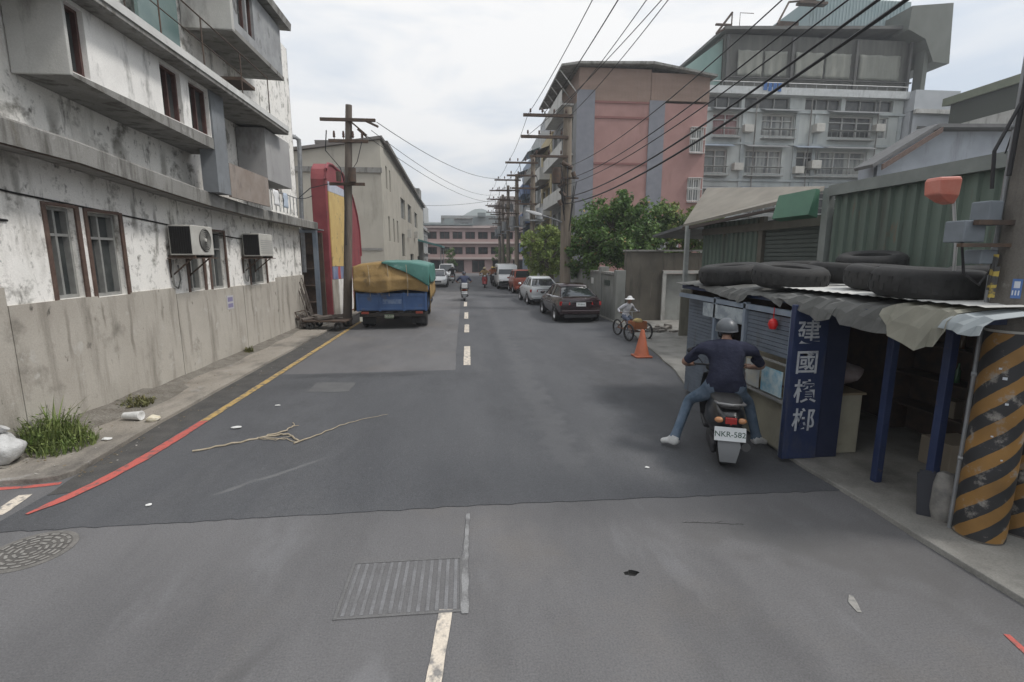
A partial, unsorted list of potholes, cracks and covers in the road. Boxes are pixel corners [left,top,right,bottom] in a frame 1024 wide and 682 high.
manhole cover [0,530,80,574]
